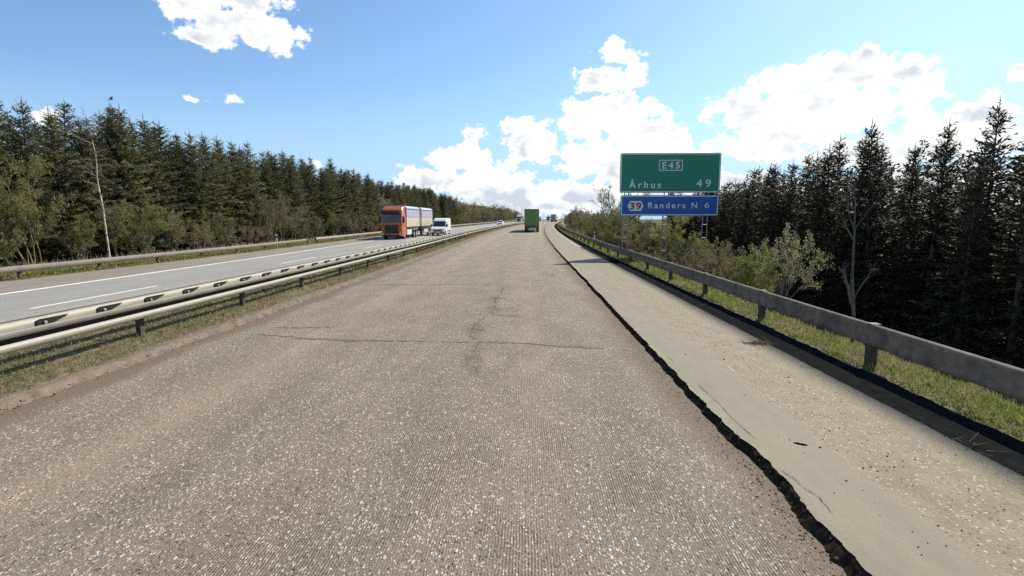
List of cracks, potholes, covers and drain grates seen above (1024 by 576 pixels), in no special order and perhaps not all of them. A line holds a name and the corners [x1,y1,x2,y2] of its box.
crack [258,289,621,371]
